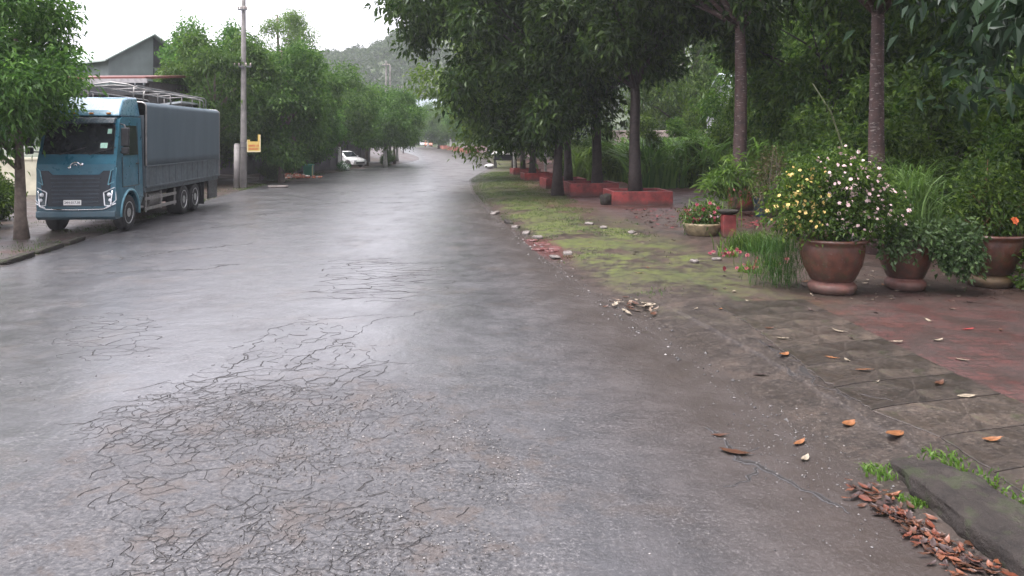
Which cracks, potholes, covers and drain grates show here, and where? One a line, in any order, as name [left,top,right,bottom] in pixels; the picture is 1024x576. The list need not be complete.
crack [705,427,849,514]
crack [60,310,496,576]
crack [309,258,455,302]
